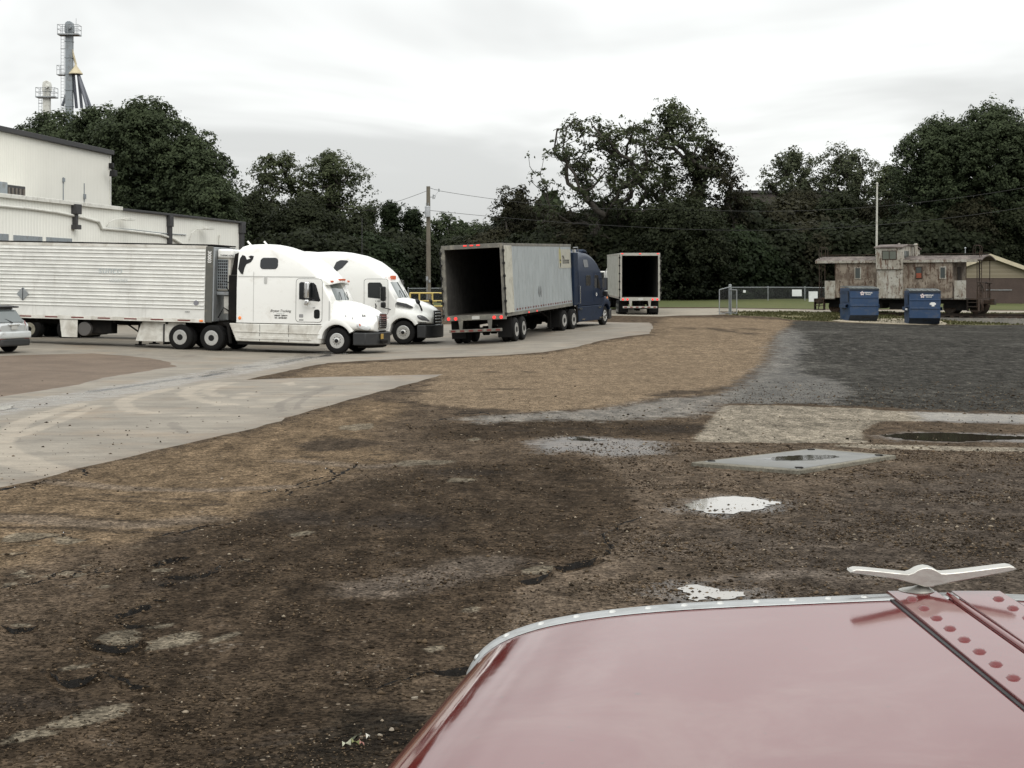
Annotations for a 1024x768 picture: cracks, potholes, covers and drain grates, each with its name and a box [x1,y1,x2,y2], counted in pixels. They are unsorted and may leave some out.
crack [262,464,358,496]
pothole [79,639,151,661]
pothole [44,670,105,693]
pothole [0,625,42,635]
manhole cover [691,448,896,475]
pothole [164,571,219,580]
pothole [553,557,606,576]
crack [601,517,640,557]
pothole [150,557,190,568]
pothole [508,569,556,589]
pothole [114,605,152,619]
